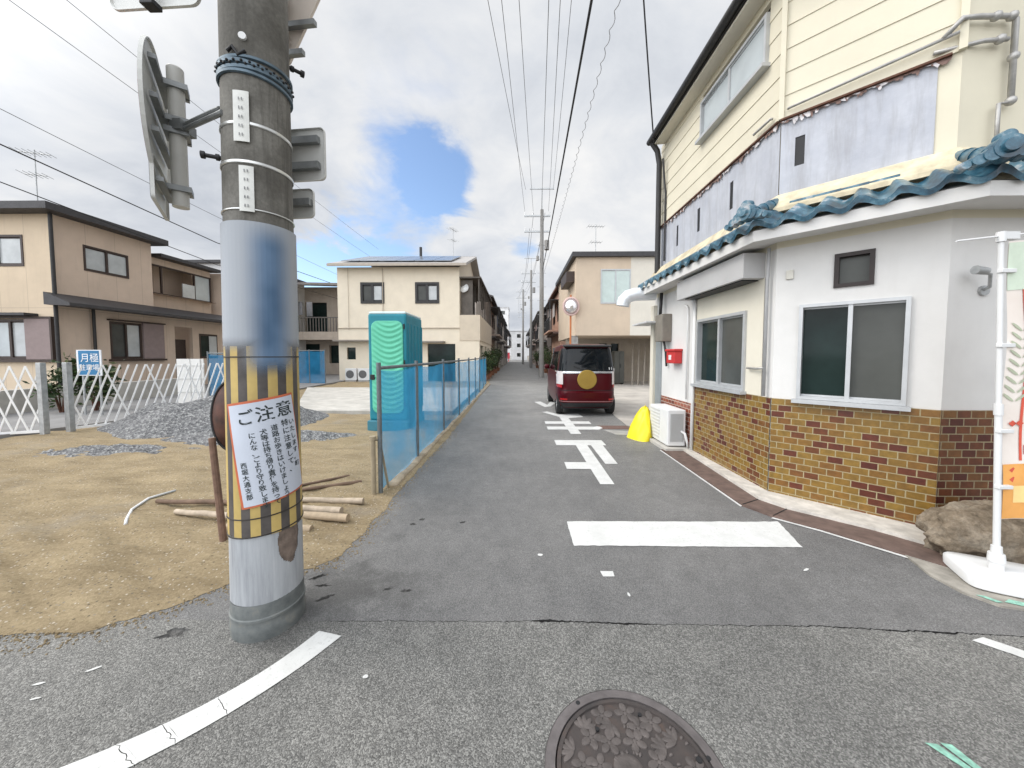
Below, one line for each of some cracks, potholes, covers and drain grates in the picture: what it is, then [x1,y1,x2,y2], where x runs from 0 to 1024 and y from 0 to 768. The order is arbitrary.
manhole cover [544,690,724,768]
